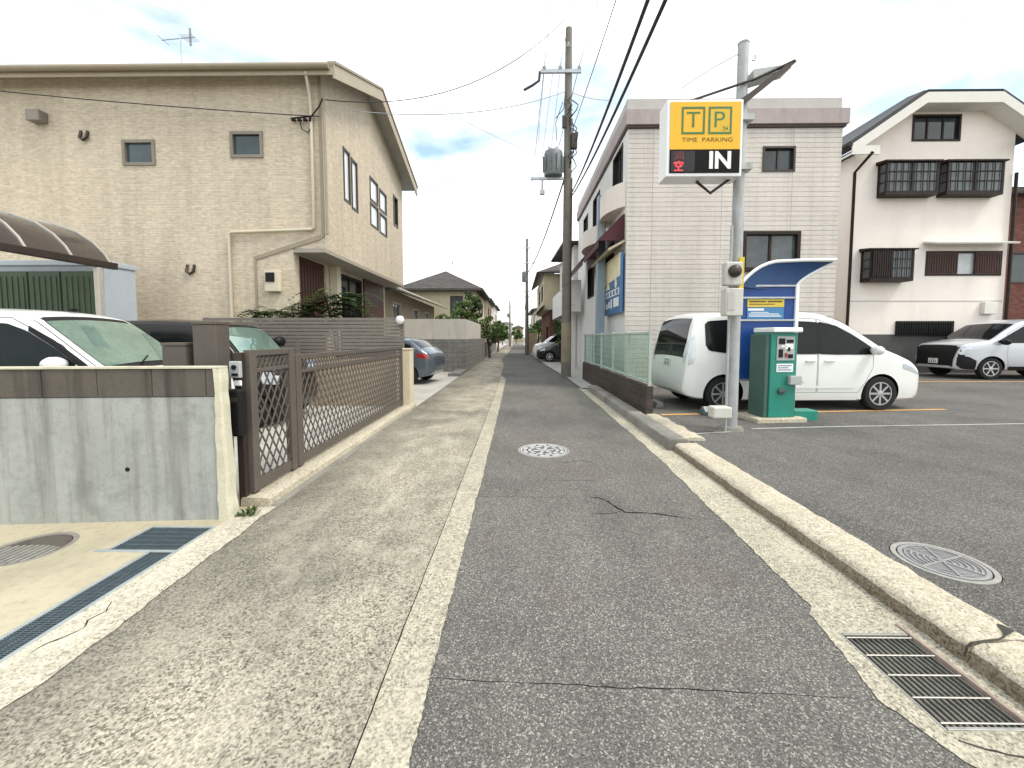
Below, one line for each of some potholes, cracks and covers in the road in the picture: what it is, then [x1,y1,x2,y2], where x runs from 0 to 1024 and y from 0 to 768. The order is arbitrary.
manhole cover [518,443,570,458]
crack [480,460,690,519]
crack [957,739,1024,759]
drain grate [839,623,1024,731]
crack [436,677,871,700]
crack [29,602,111,654]
manhole cover [890,542,1002,585]
